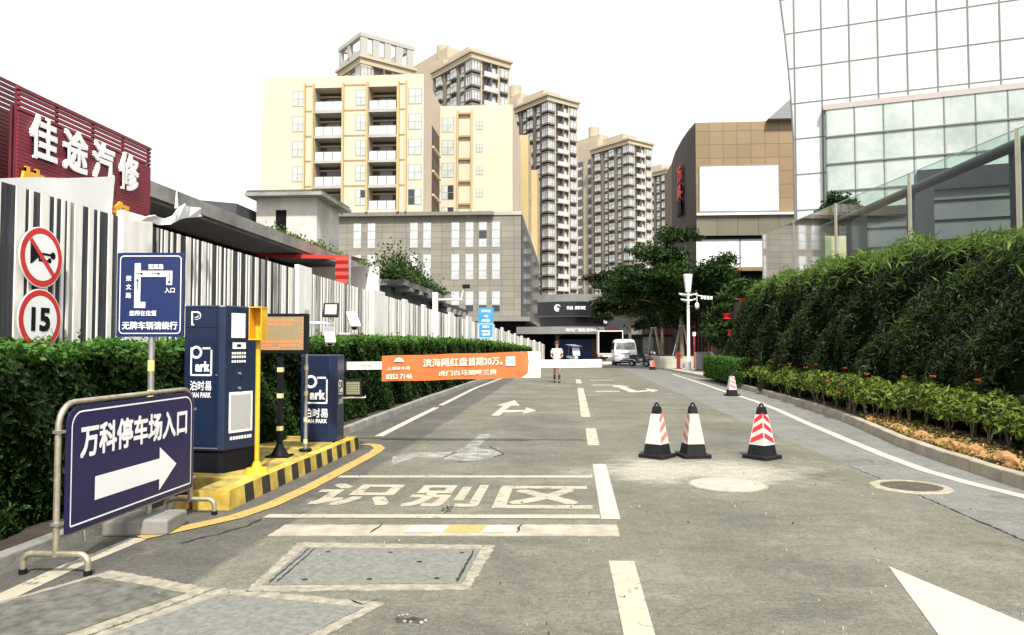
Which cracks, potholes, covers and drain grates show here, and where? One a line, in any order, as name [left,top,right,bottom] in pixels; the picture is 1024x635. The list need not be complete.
manhole cover [246,542,496,592]
manhole cover [870,479,954,495]
manhole cover [94,588,385,635]
manhole cover [688,478,769,493]
